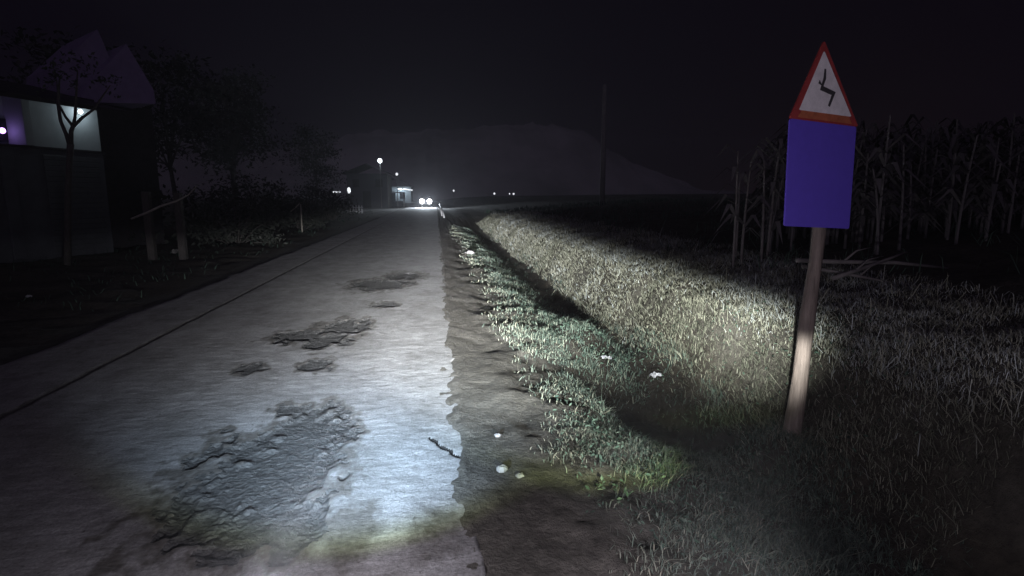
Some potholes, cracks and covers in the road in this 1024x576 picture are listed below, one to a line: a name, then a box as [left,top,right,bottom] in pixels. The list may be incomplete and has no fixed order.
pothole [272,316,373,355]
pothole [296,359,333,371]
crack [429,437,460,458]
pothole [150,399,365,568]
pothole [348,272,423,293]
pothole [231,362,270,376]
